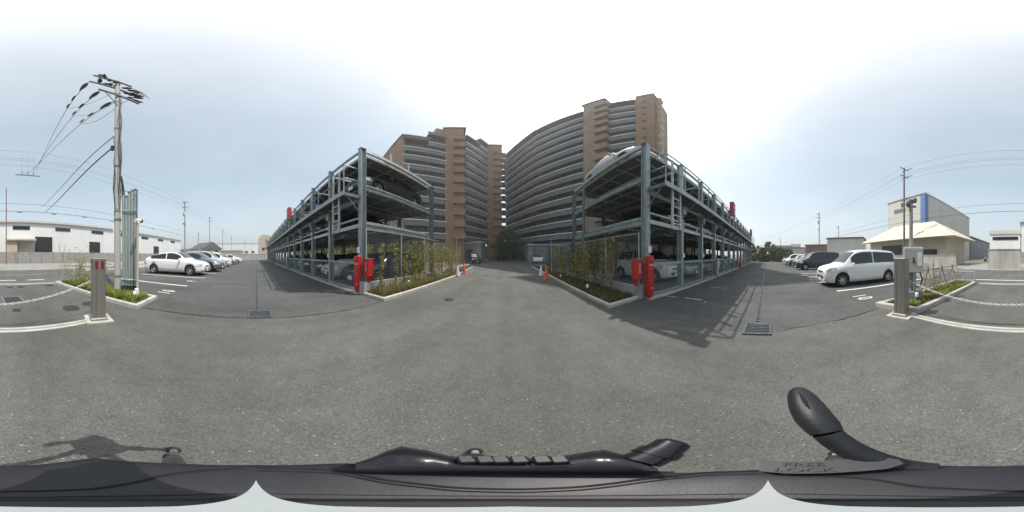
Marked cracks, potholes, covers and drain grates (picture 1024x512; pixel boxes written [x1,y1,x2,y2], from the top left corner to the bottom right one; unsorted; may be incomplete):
drain grate [248,310,272,318]
drain grate [742,323,772,335]
